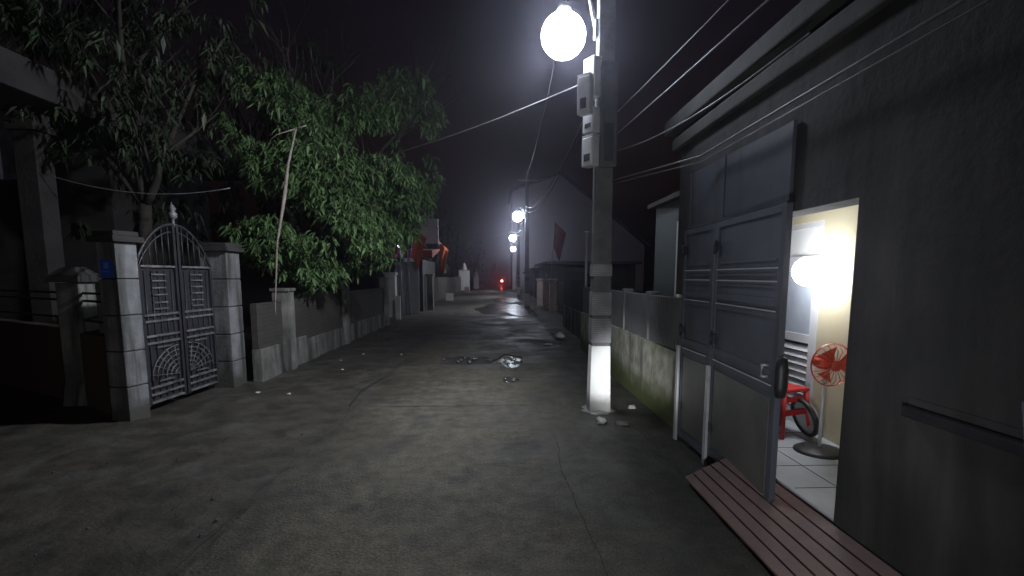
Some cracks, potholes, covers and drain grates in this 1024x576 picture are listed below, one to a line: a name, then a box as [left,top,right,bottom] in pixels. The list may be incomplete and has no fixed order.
pothole [439,356,492,365]
crack [553,433,611,576]
pothole [492,354,523,368]
